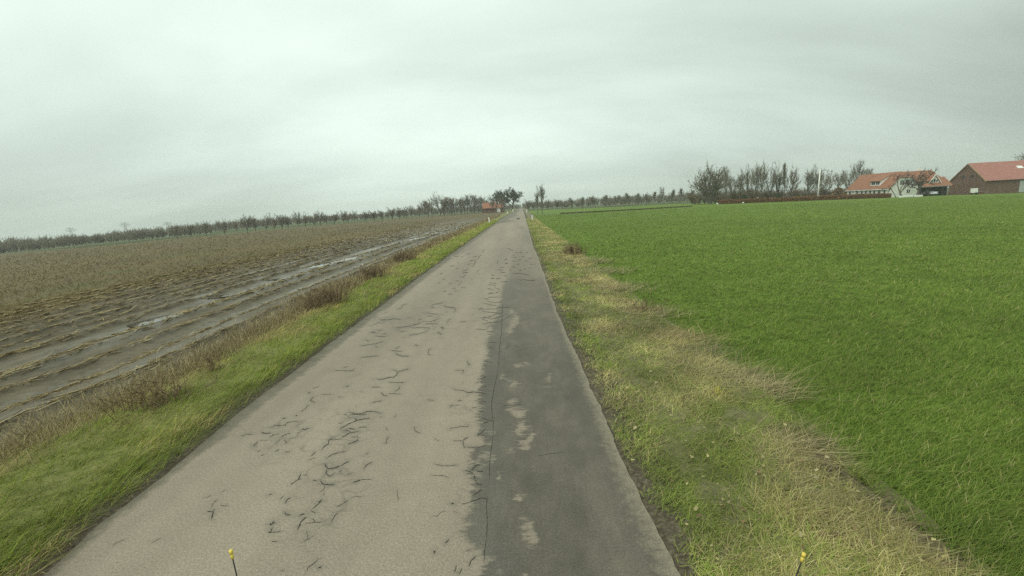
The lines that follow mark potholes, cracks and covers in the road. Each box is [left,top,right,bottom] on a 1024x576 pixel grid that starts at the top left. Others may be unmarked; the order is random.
crack [242,248,533,571]
